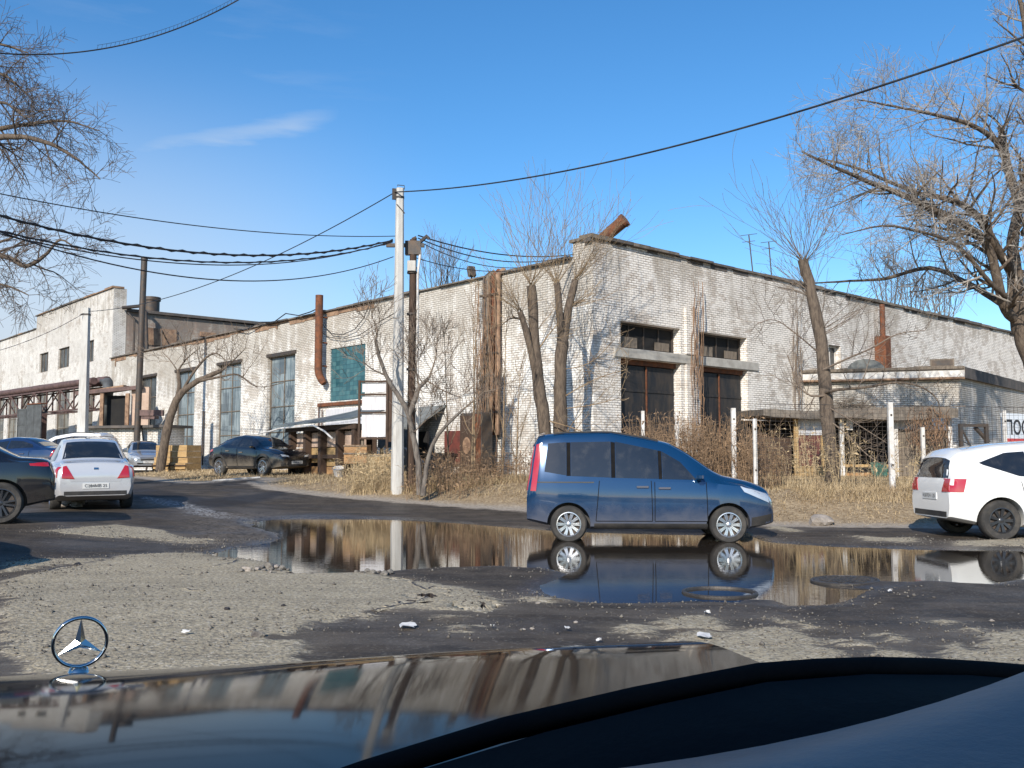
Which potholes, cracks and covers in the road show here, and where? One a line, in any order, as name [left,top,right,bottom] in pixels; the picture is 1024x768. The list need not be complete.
manhole cover [682,586,758,599]
manhole cover [810,575,880,586]
